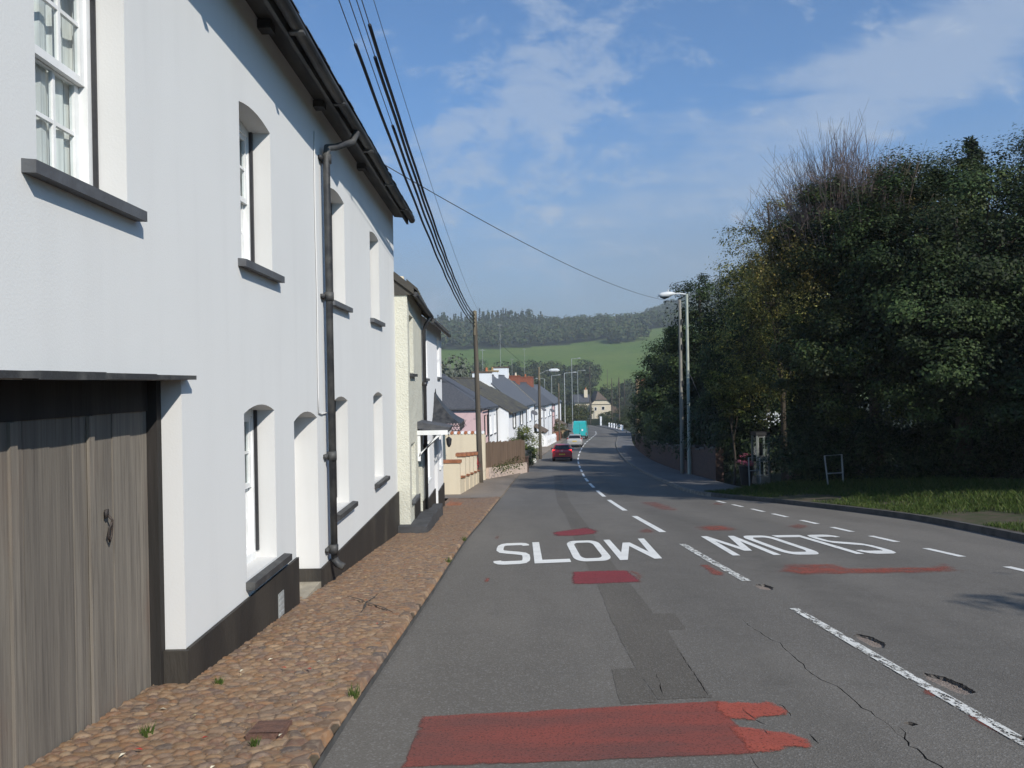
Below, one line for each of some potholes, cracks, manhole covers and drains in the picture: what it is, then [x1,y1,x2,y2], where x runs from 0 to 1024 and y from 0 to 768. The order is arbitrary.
pothole [854,634,886,648]
crack [744,621,943,768]
pothole [923,673,976,695]
crack [348,594,392,612]
utility cover [245,720,292,740]
